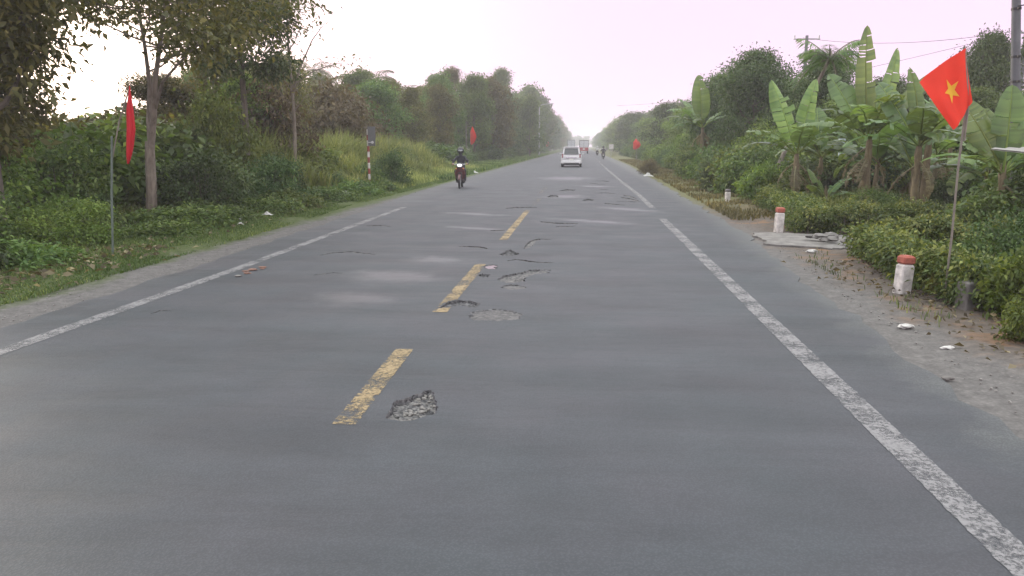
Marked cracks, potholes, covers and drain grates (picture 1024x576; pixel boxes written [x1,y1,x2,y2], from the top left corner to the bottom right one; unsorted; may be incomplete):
pothole [497,269,551,283]
pothole [439,300,480,308]
crack [508,207,577,263]
crack [592,181,640,205]
pothole [385,390,439,421]
